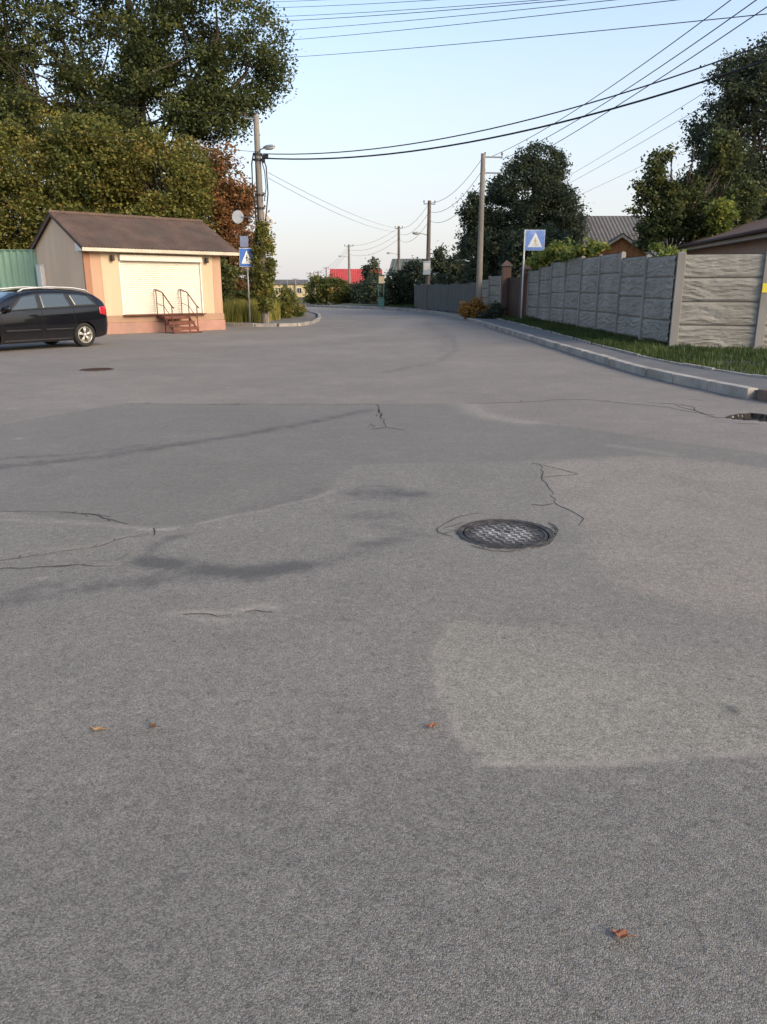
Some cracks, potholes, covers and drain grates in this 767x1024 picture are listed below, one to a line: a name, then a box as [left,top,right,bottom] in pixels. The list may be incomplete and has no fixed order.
crack [125,402,405,431]
pothole [725,413,767,422]
crack [498,399,745,424]
manhole cover [455,519,556,550]
crack [436,463,584,552]
crack [0,511,156,569]
